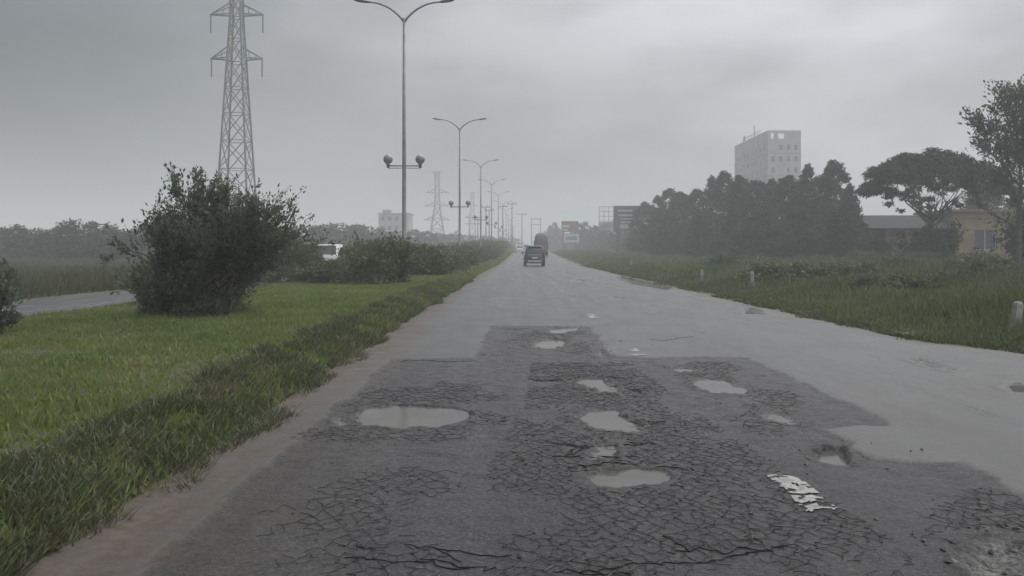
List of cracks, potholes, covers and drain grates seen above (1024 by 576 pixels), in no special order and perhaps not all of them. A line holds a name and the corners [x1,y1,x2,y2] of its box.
pothole [344,402,484,432]
crack [258,328,926,576]
pothole [539,325,590,334]
pothole [565,464,685,494]
pothole [746,408,812,427]
pothole [572,434,641,466]
pothole [559,377,632,395]
pothole [563,406,653,435]
pothole [798,440,868,470]
crack [910,487,1024,546]
pothole [515,336,579,351]
pothole [680,378,756,397]
